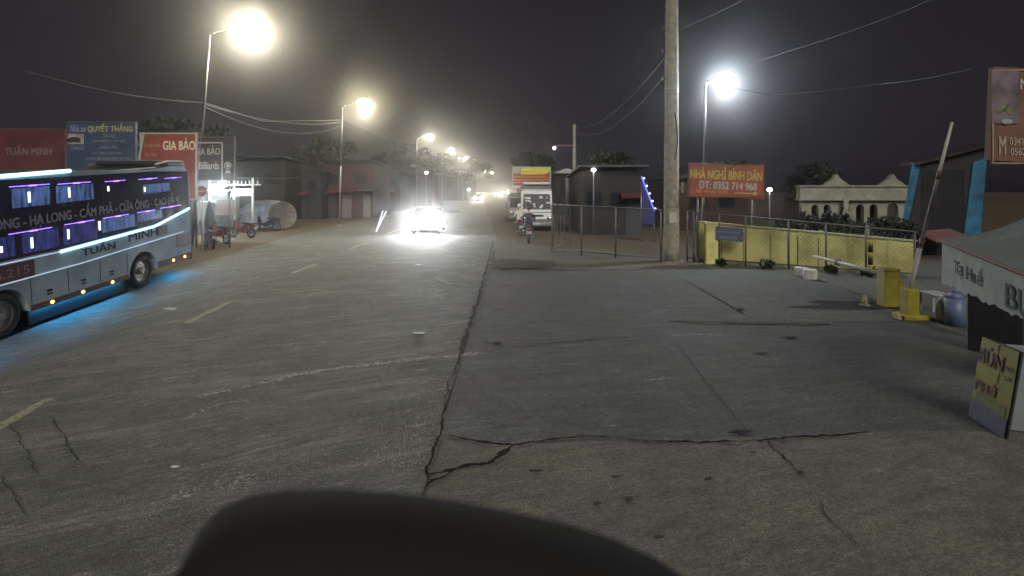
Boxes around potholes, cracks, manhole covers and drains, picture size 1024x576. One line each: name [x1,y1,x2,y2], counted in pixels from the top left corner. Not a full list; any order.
crack [48,415,80,462]
crack [422,399,610,496]
crack [485,336,635,348]
crack [821,502,857,547]
crack [1,425,41,516]
